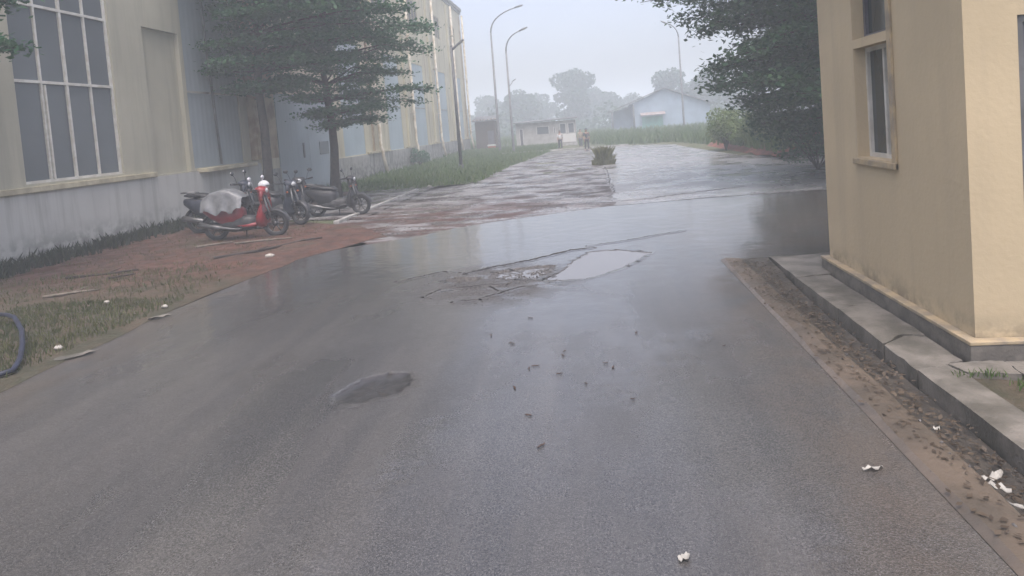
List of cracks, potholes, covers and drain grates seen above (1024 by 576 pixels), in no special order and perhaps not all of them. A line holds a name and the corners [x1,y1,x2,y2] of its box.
pothole [541,249,656,283]
crack [396,229,687,304]
pothole [326,368,423,409]
pothole [439,276,485,286]
pothole [484,264,560,281]
